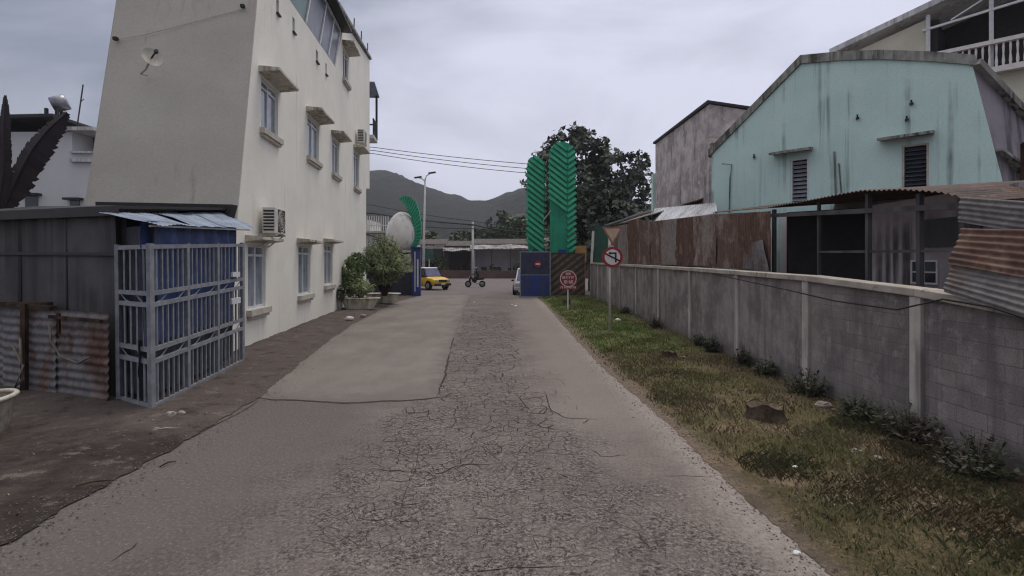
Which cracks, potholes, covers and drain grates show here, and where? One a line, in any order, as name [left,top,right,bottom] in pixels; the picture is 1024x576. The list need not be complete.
crack [192,310,666,572]
